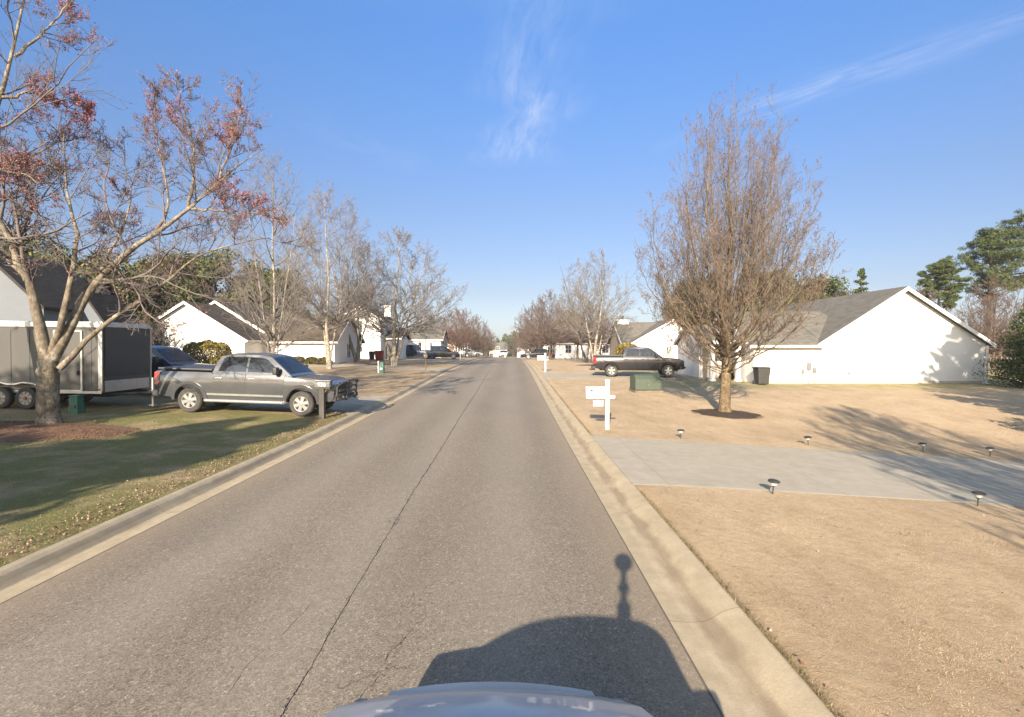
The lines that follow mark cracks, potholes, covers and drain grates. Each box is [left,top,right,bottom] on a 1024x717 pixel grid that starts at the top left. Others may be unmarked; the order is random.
crack [279,370,490,717]
